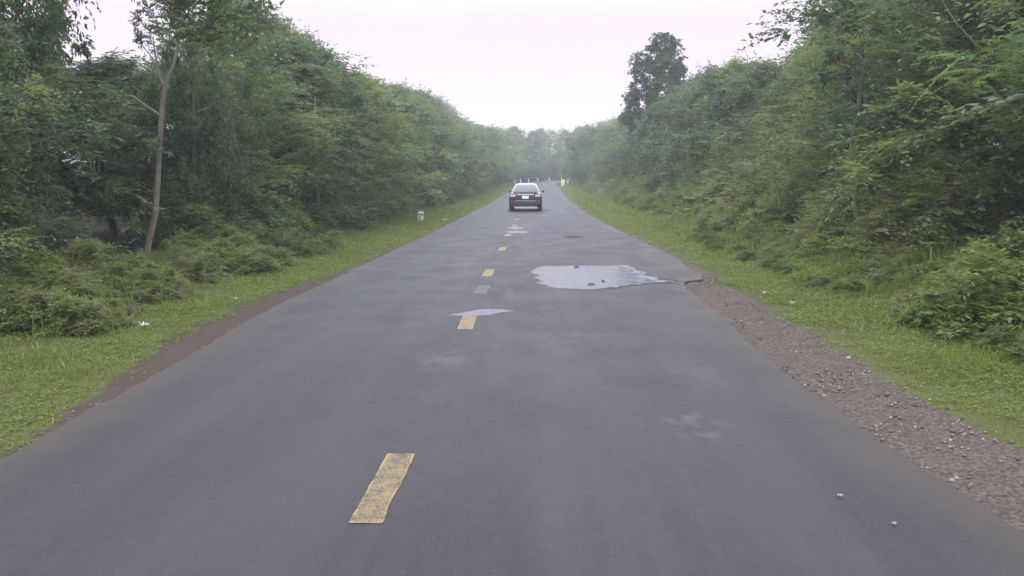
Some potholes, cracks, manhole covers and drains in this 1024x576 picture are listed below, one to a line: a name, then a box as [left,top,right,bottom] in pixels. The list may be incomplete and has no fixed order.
pothole [528,265,678,290]
pothole [446,308,516,316]
